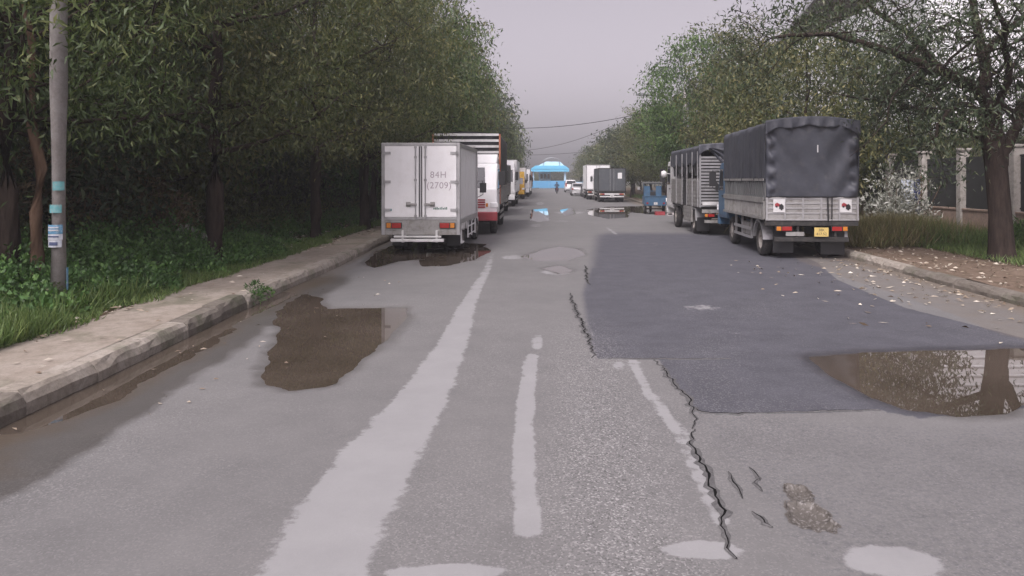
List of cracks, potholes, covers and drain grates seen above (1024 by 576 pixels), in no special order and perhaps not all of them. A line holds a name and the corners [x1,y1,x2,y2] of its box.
pothole [784,499,841,534]
crack [568,265,881,559]
pothole [782,483,815,502]
